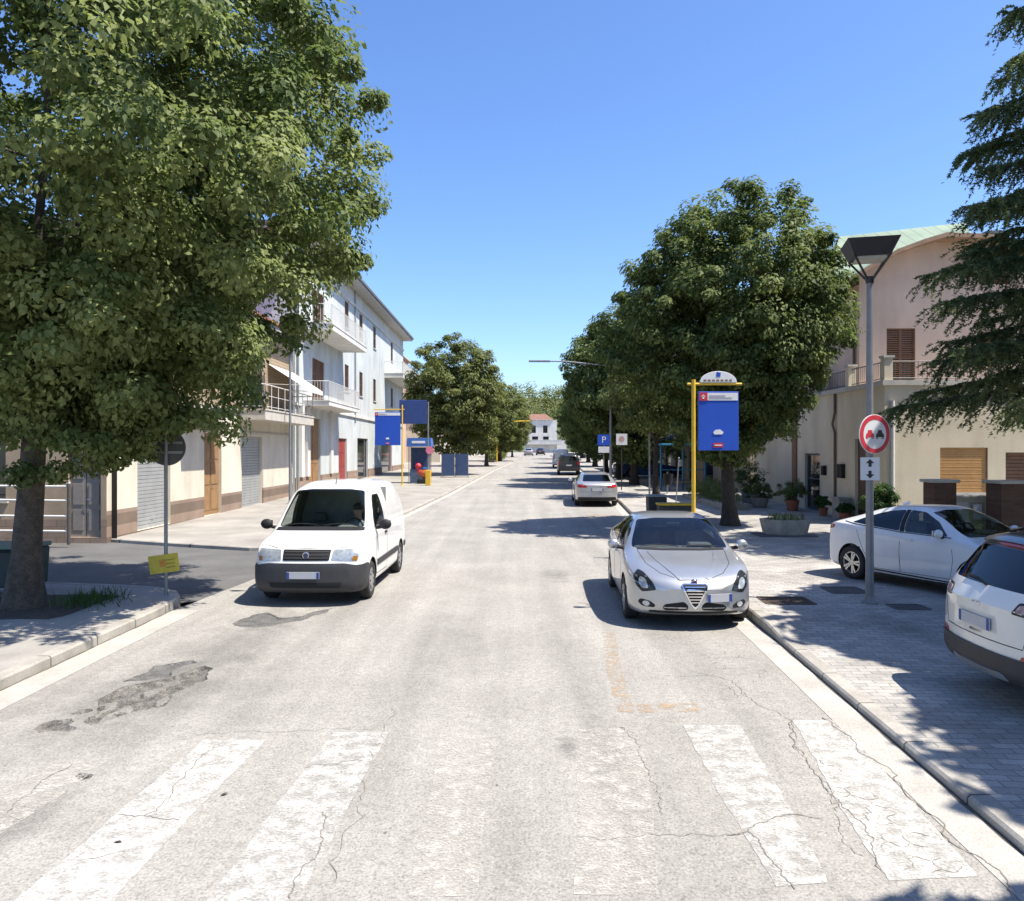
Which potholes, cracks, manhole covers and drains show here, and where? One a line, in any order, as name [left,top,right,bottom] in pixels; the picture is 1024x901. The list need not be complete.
crack [288,706,395,898]
pothole [34,719,77,733]
pothole [83,666,213,725]
crack [118,728,336,820]
manhole cover [756,596,817,605]
crack [8,764,72,811]
crack [581,653,962,889]
pothole [124,660,197,682]
manhole cover [820,586,865,594]
